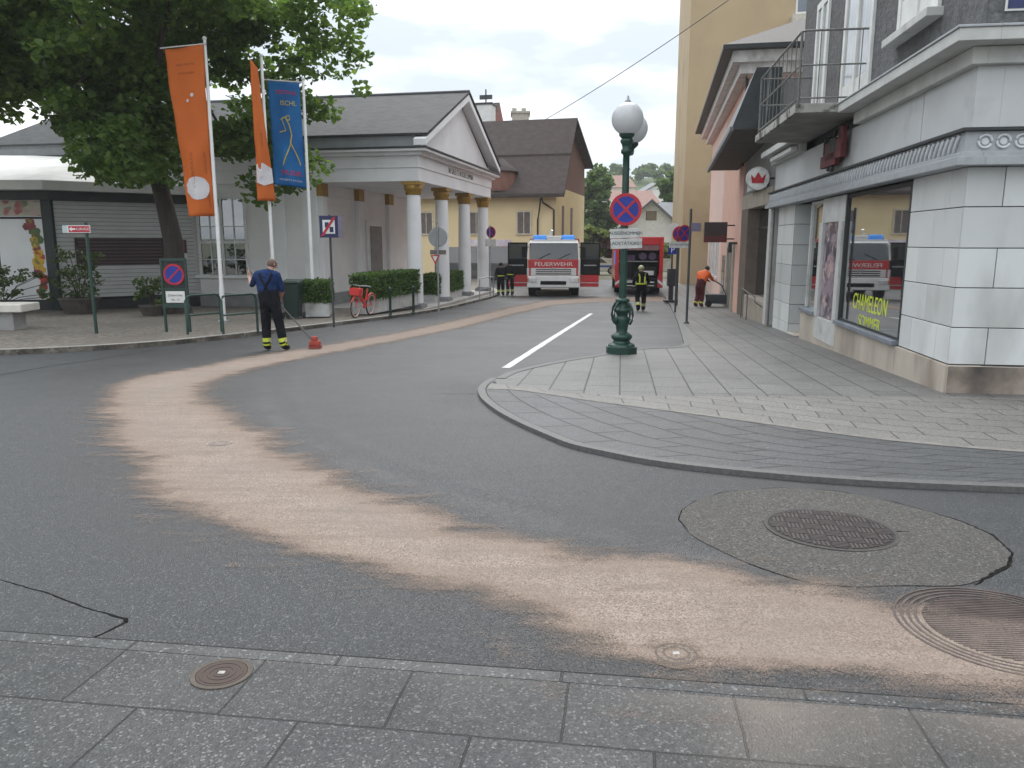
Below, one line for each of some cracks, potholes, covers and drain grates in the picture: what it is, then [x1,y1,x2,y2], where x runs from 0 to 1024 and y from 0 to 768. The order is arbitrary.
utility cover [190,658,253,690]
utility cover [648,641,705,670]
crack [2,580,128,637]
manhole cover [764,509,900,552]
manhole cover [891,587,1024,676]
